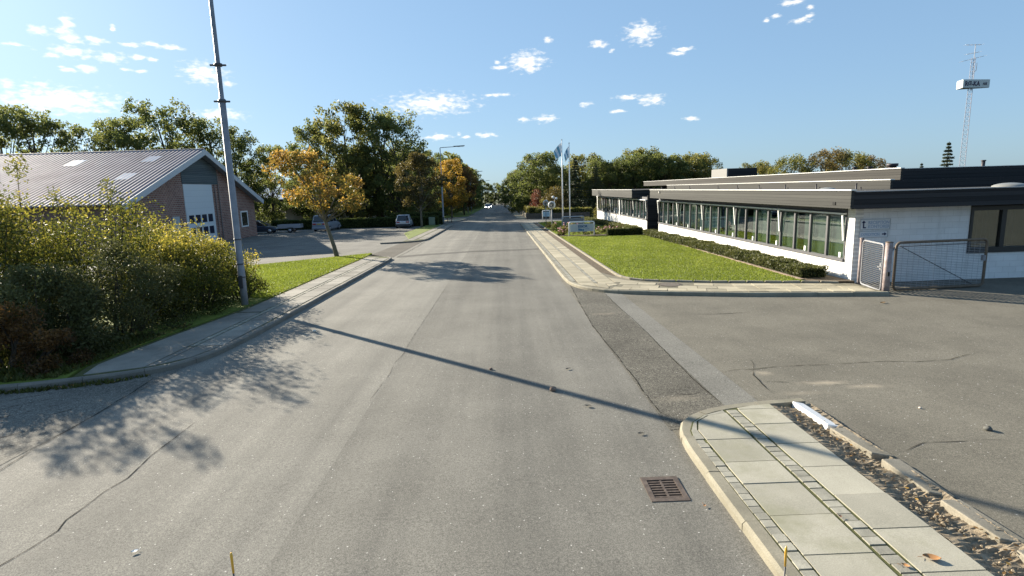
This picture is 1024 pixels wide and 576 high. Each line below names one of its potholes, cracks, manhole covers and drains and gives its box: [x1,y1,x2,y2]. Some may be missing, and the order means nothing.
crack [723,354,969,391]
crack [0,393,89,449]
crack [0,425,191,566]
drain grate [640,476,691,502]
